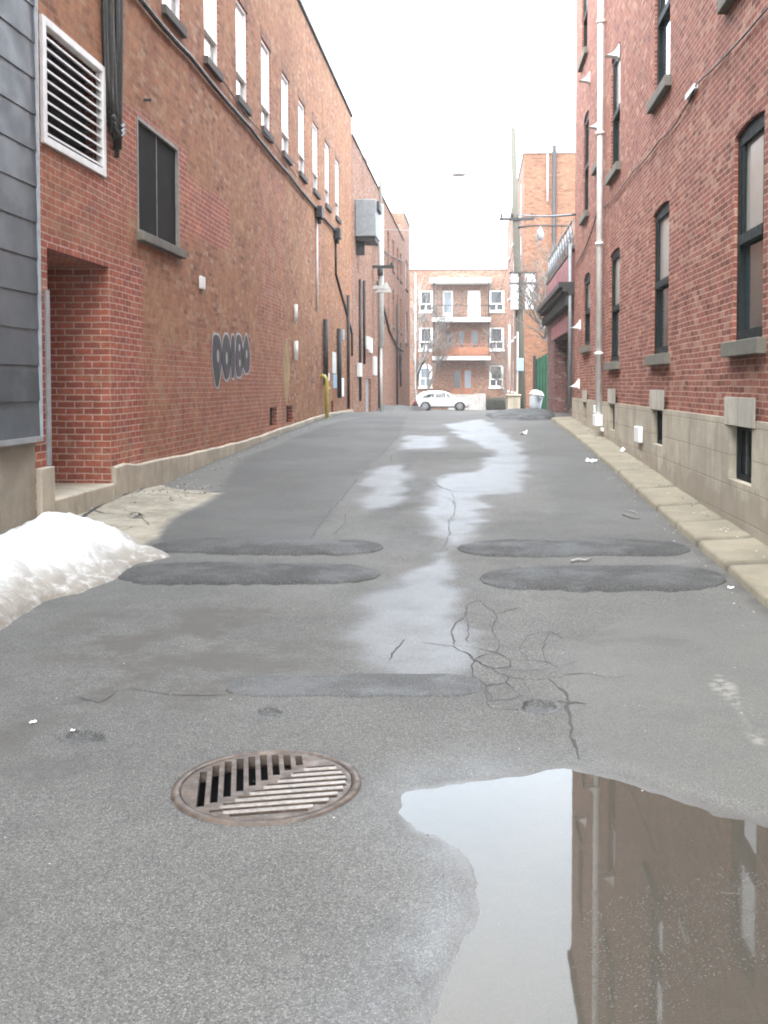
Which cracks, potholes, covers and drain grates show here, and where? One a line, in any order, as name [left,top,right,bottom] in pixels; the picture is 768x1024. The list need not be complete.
crack [424,600,628,759]
pothole [250,705,287,719]
crack [80,689,225,702]
crack [311,433,512,539]
pothole [516,698,563,715]
pothole [58,728,111,744]
